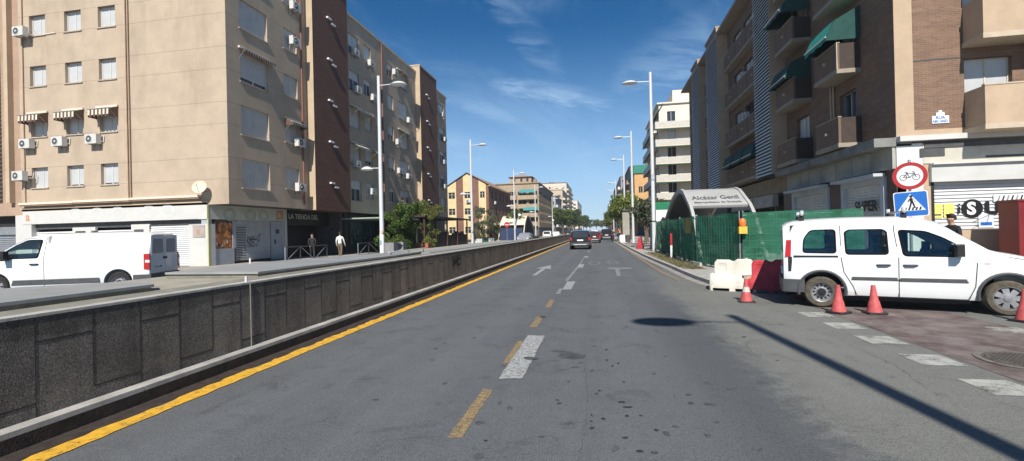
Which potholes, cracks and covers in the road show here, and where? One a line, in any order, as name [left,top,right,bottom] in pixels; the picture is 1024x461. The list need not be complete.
manhole cover [972,350,1024,369]
